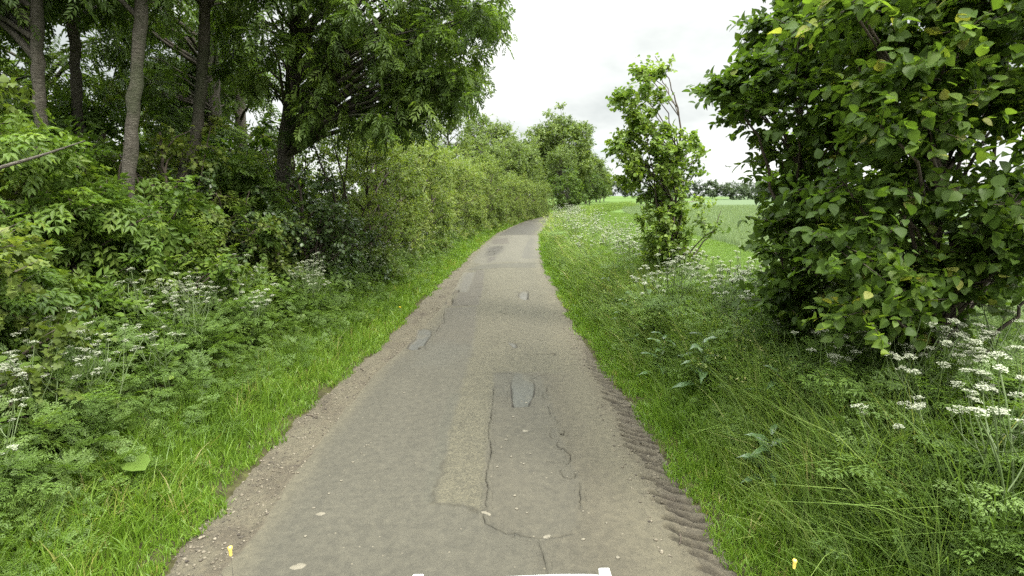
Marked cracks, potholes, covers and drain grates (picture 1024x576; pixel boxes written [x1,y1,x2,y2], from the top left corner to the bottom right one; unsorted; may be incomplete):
crack [476,372,586,575]
